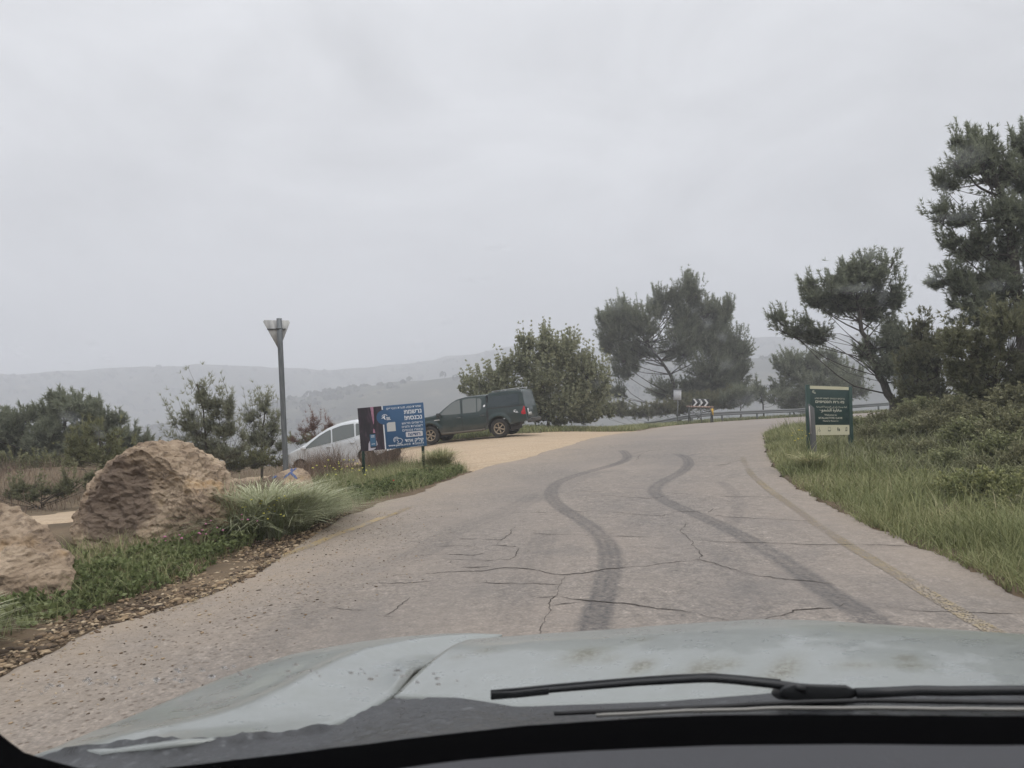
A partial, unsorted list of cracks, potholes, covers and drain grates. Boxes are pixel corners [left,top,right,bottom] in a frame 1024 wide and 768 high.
crack [425,524,905,633]
